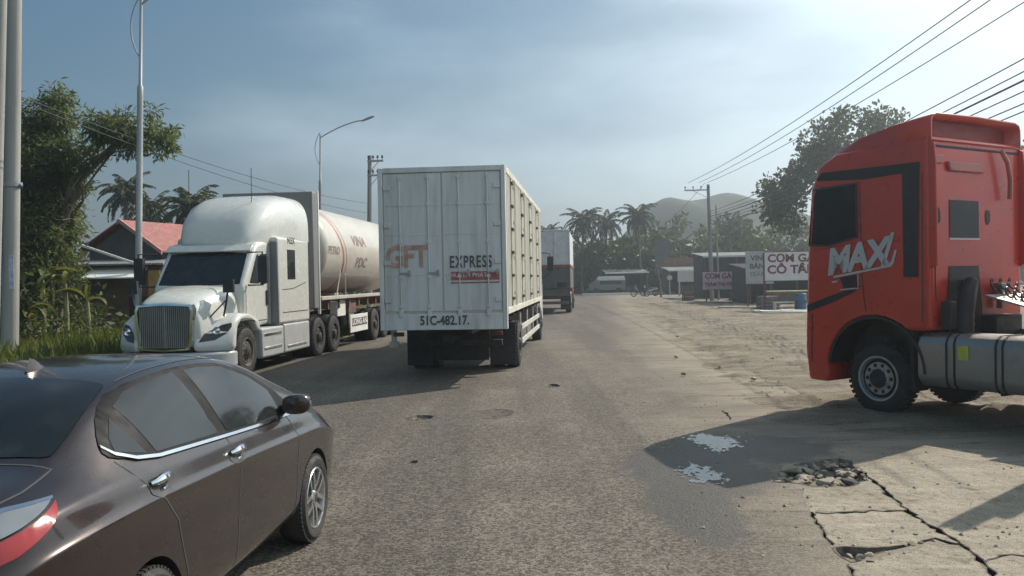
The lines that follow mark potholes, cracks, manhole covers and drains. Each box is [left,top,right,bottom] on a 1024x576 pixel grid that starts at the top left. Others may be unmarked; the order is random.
pothole [771,458,866,486]
pothole [833,544,910,565]
crack [810,466,1024,576]
